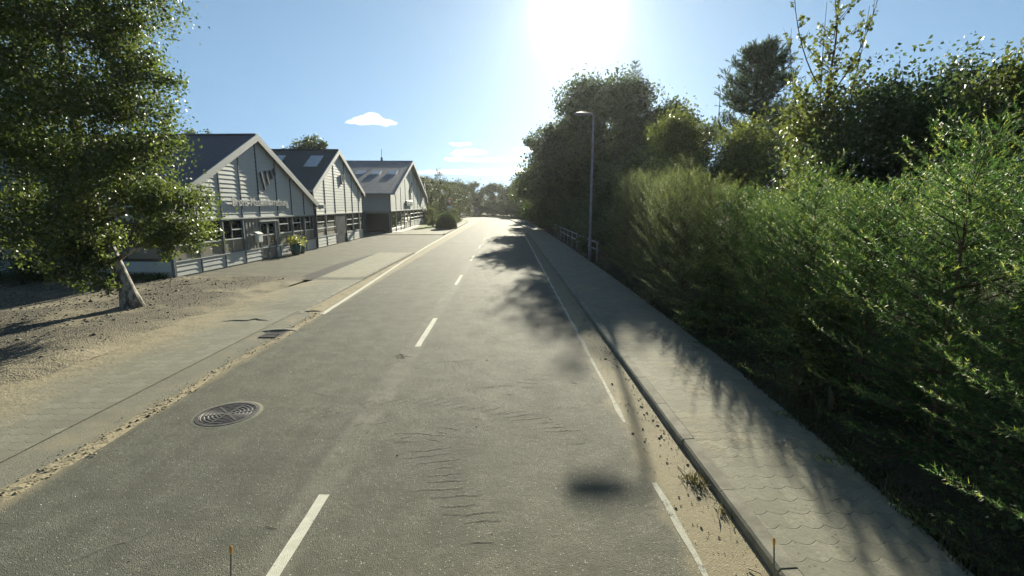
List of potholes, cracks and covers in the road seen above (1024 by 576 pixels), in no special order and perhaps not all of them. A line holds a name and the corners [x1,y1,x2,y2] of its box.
manhole cover [190,401,264,428]
drain grate [258,328,299,338]
